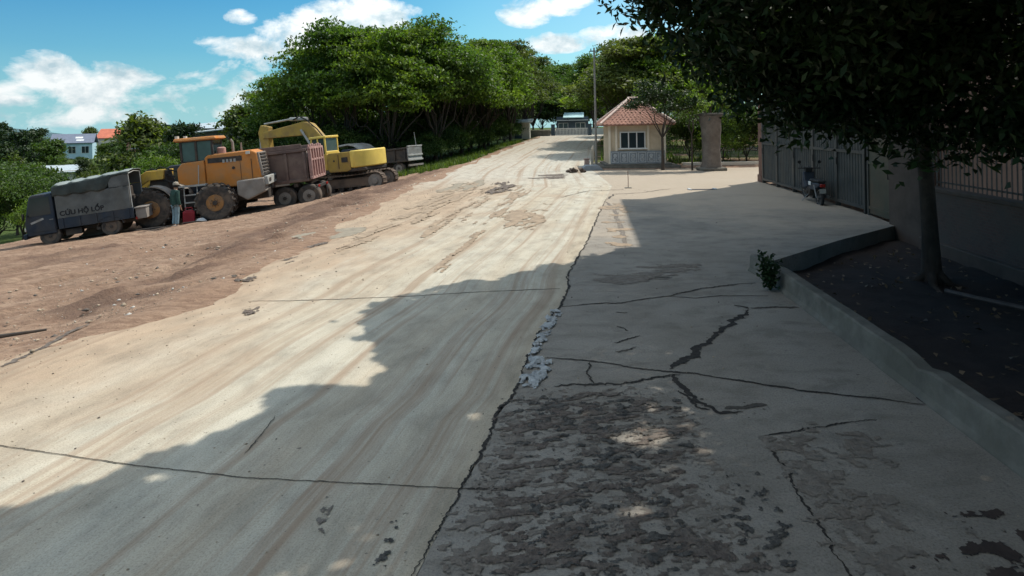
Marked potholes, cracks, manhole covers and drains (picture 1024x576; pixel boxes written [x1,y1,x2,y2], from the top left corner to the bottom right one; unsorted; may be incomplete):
crack [547,277,924,418]
